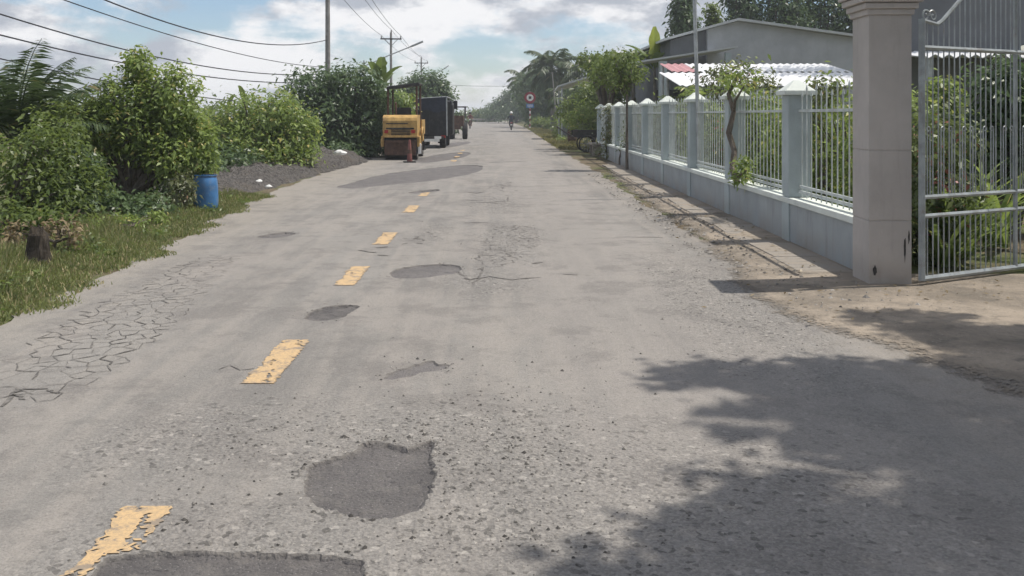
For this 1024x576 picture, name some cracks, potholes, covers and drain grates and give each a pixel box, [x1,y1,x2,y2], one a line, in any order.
crack [0,257,242,406]
crack [458,222,541,286]
